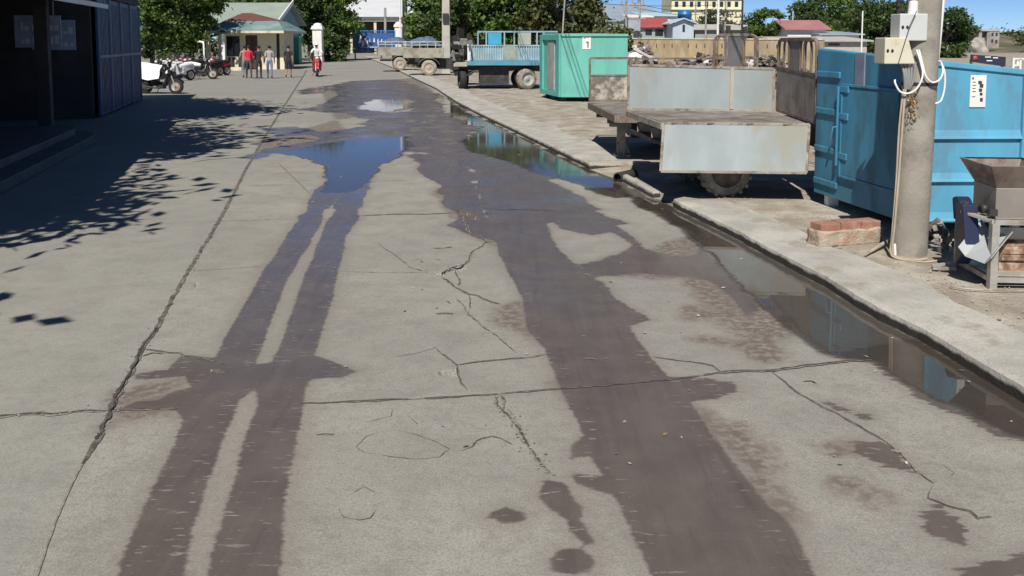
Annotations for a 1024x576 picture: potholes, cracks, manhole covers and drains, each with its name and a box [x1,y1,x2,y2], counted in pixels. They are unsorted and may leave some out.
crack [356,411,450,459]
crack [138,348,224,364]
crack [463,393,555,475]
crack [378,216,610,389]
crack [772,372,992,519]
